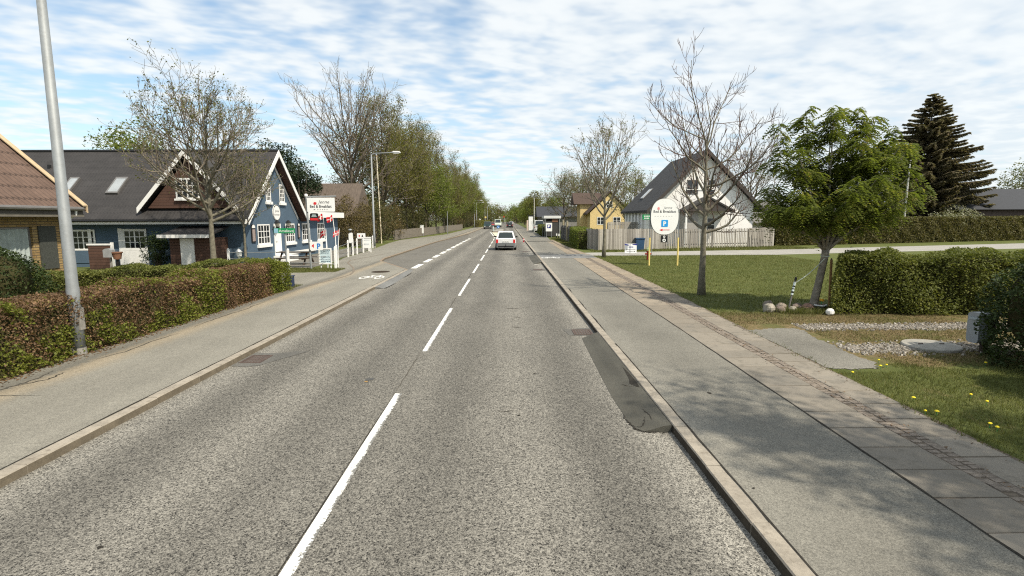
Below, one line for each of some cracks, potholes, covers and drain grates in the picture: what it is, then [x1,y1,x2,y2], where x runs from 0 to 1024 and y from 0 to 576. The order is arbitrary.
manhole cover [900,339,964,353]
drain grate [563,328,594,336]
